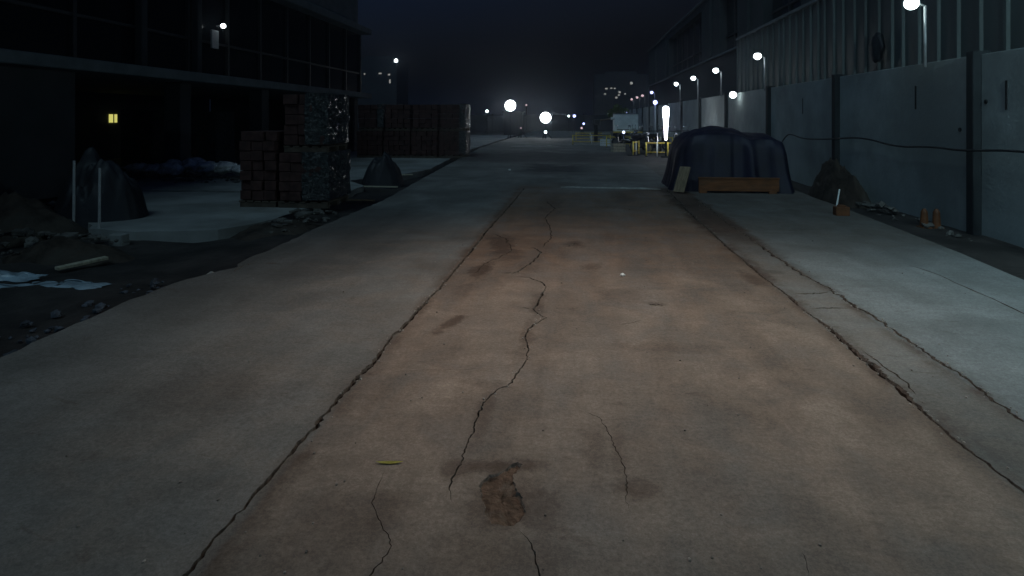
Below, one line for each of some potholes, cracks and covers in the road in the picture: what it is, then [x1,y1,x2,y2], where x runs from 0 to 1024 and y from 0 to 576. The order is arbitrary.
pothole [479,462,526,526]
crack [182,187,1024,576]
